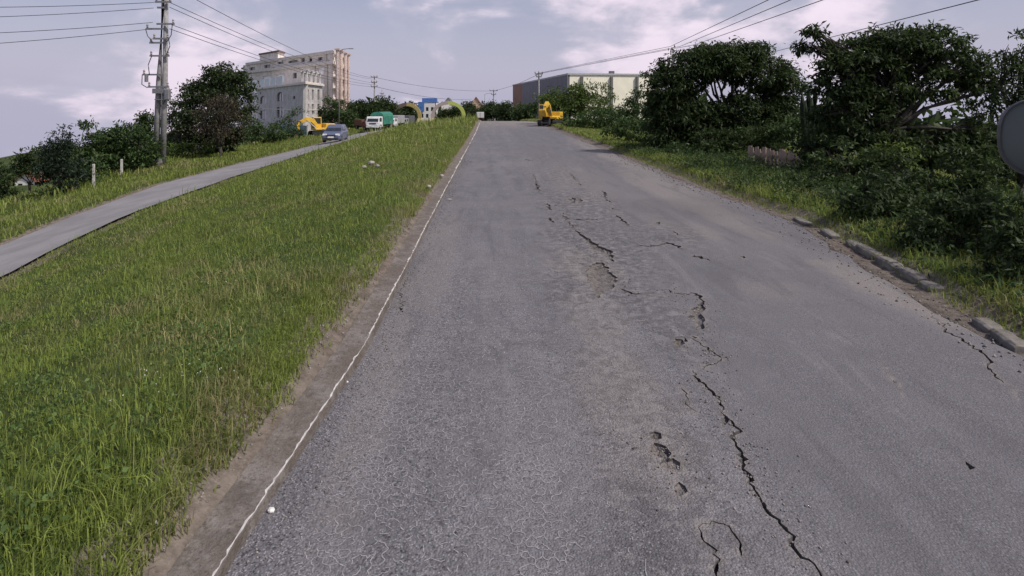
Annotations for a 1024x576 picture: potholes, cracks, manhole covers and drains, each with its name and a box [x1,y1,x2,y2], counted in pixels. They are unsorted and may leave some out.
pothole [660,458,680,469]
pothole [651,443,672,462]
crack [525,159,710,261]
crack [621,289,705,308]
crack [681,336,822,576]
crack [931,316,1011,386]
pothole [585,262,618,299]
pothole [674,482,688,497]
